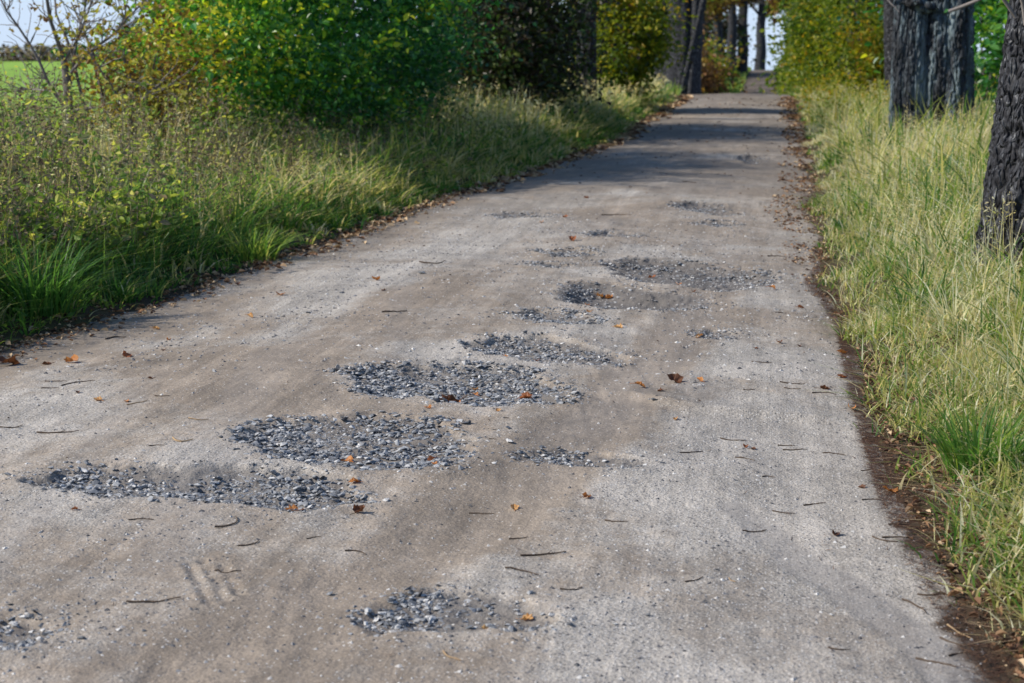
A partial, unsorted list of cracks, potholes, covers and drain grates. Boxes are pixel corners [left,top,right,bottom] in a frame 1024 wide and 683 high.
pothole [507,446,664,471]
pothole [681,326,750,339]
pothole [4,458,390,513]
pothole [550,280,717,311]
pothole [590,256,787,292]
pothole [452,331,636,367]
pothole [218,409,482,472]
pothole [492,307,620,326]
pothole [665,200,743,216]
pothole [322,359,593,407]
pothole [0,604,79,653]
pothole [529,245,605,257]
